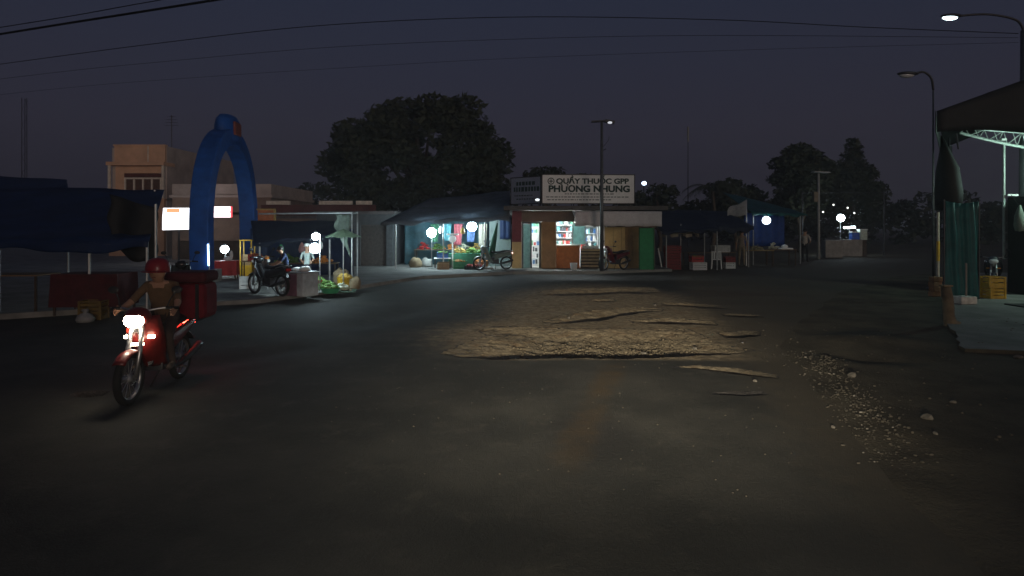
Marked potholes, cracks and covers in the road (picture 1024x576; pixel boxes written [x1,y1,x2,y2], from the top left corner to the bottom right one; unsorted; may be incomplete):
pothole [675,365,780,378]
pothole [439,326,755,360]
pothole [536,287,662,296]
pothole [629,317,718,325]
pothole [542,307,664,324]
